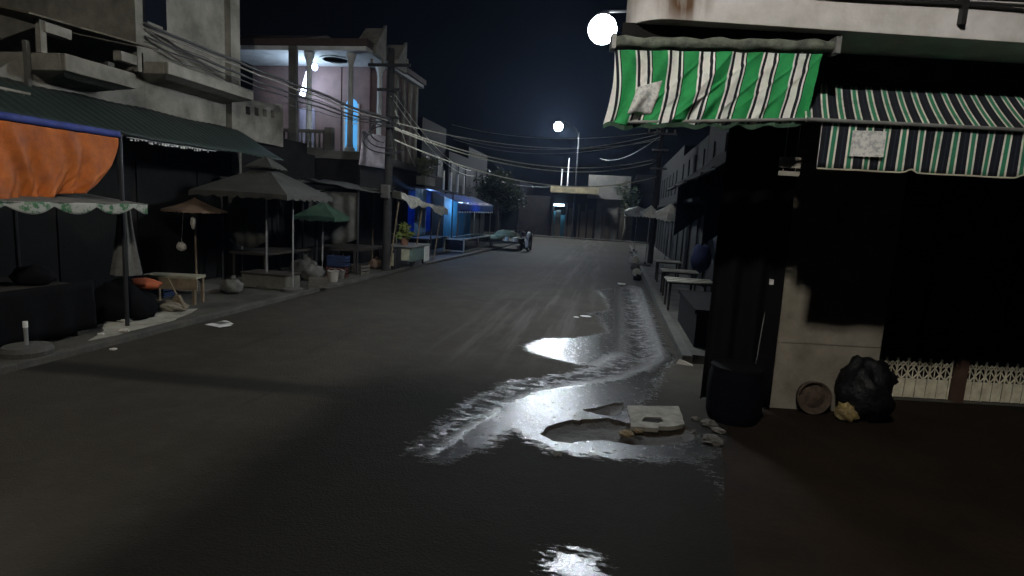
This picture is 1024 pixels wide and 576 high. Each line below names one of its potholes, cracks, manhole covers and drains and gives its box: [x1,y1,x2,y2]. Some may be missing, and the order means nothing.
pothole [540,418,698,446]
pothole [582,403,624,416]
